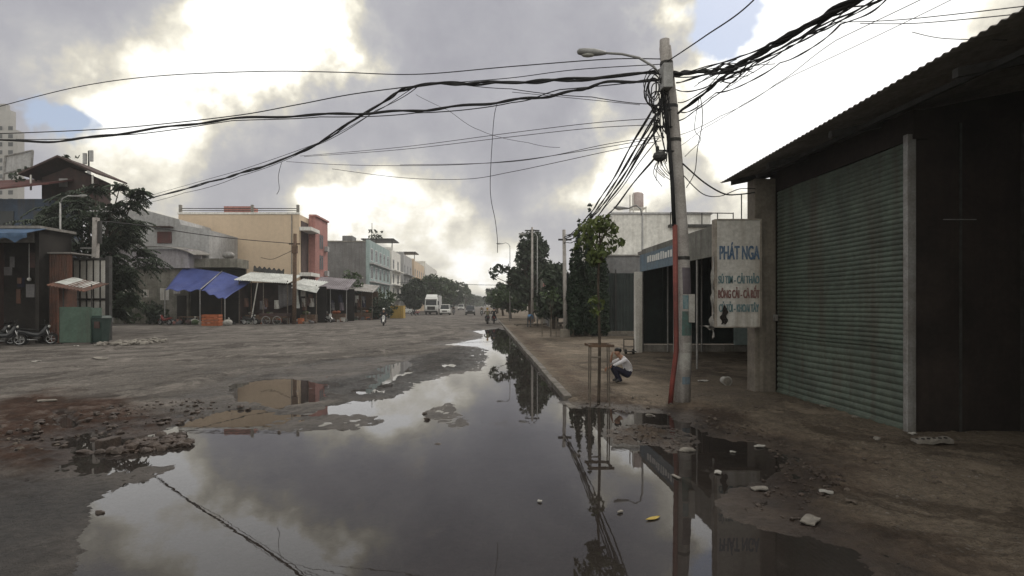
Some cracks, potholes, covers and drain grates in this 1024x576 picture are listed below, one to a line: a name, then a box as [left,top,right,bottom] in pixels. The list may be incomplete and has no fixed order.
pothole [370,360,420,376]
pothole [364,372,404,382]
pothole [346,386,391,394]
pothole [221,377,350,409]
